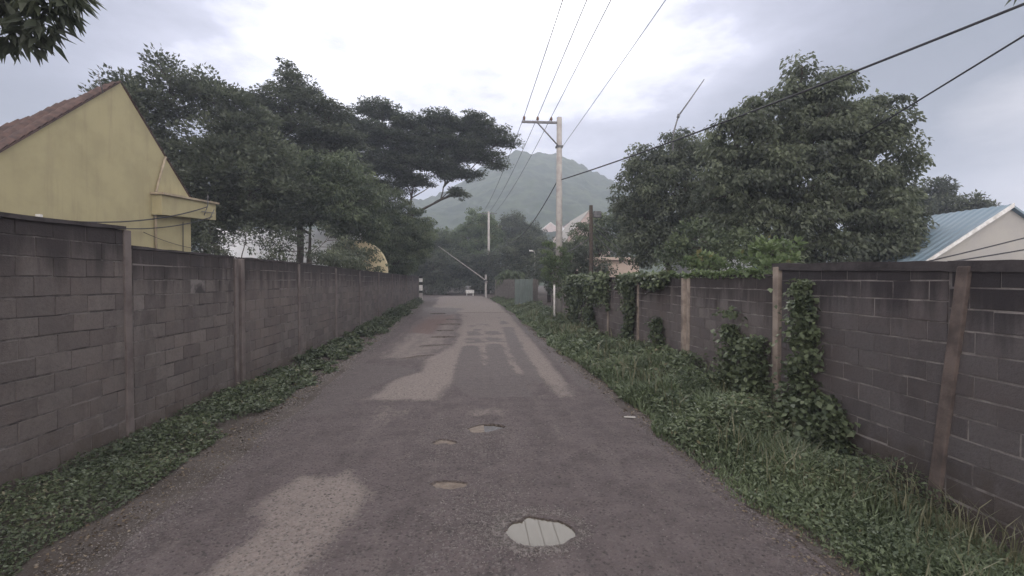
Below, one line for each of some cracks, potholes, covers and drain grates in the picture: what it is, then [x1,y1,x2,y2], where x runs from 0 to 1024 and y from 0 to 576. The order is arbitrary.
pothole [467,423,506,433]
pothole [430,480,468,489]
pothole [505,516,576,546]
